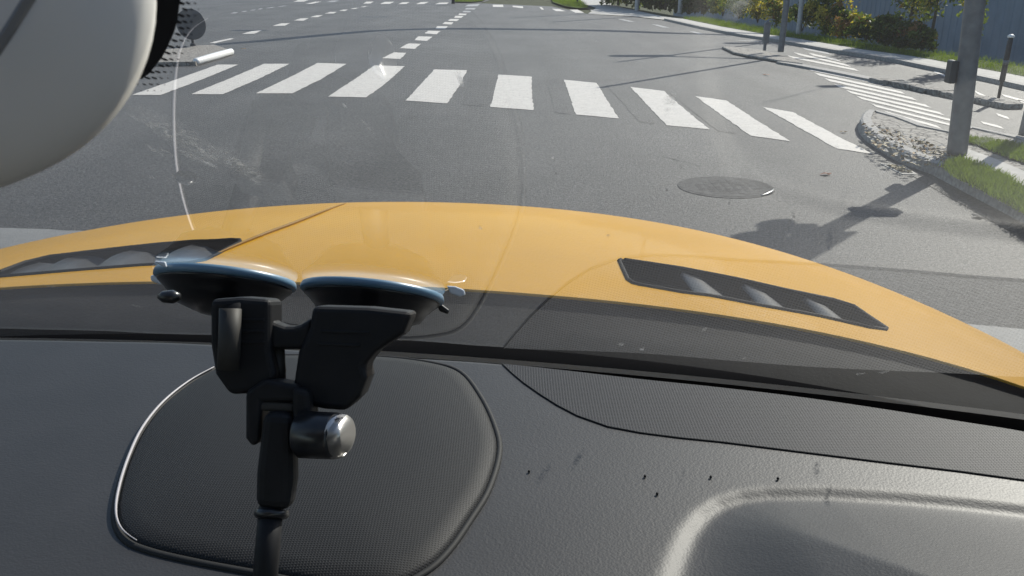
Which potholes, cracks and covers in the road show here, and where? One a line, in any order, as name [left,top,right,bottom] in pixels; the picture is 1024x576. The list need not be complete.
manhole cover [677,176,775,199]
